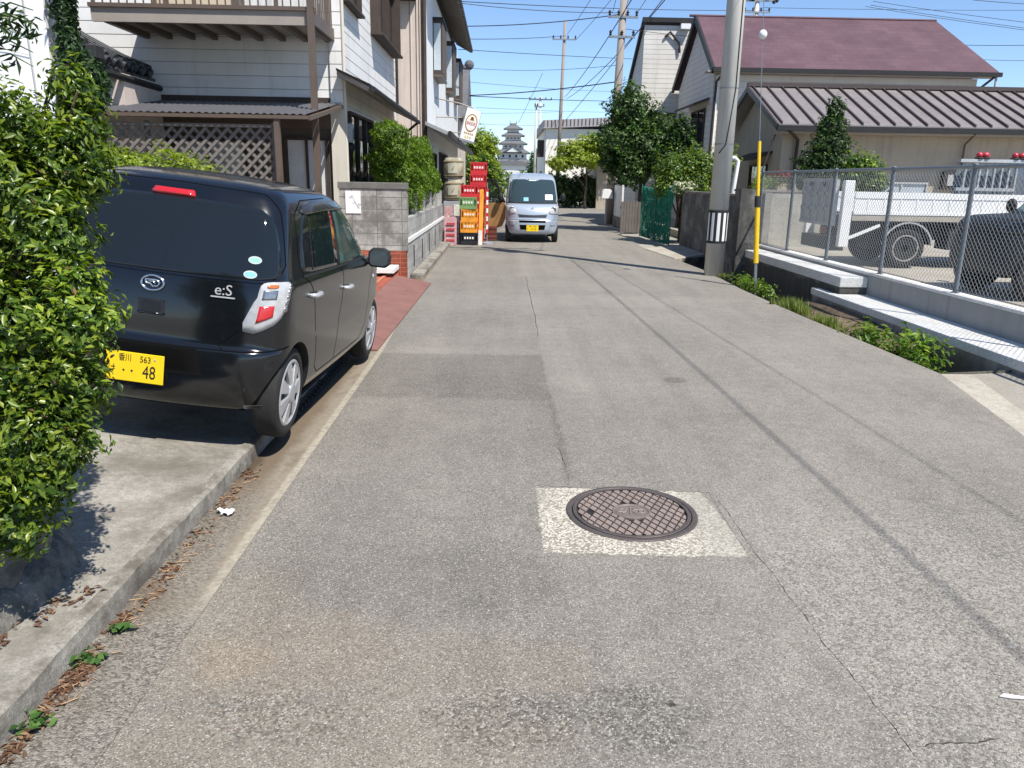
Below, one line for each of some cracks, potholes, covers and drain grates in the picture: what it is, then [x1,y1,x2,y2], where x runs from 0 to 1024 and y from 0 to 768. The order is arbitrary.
manhole cover [566,486,698,542]
crack [717,498,1001,761]
